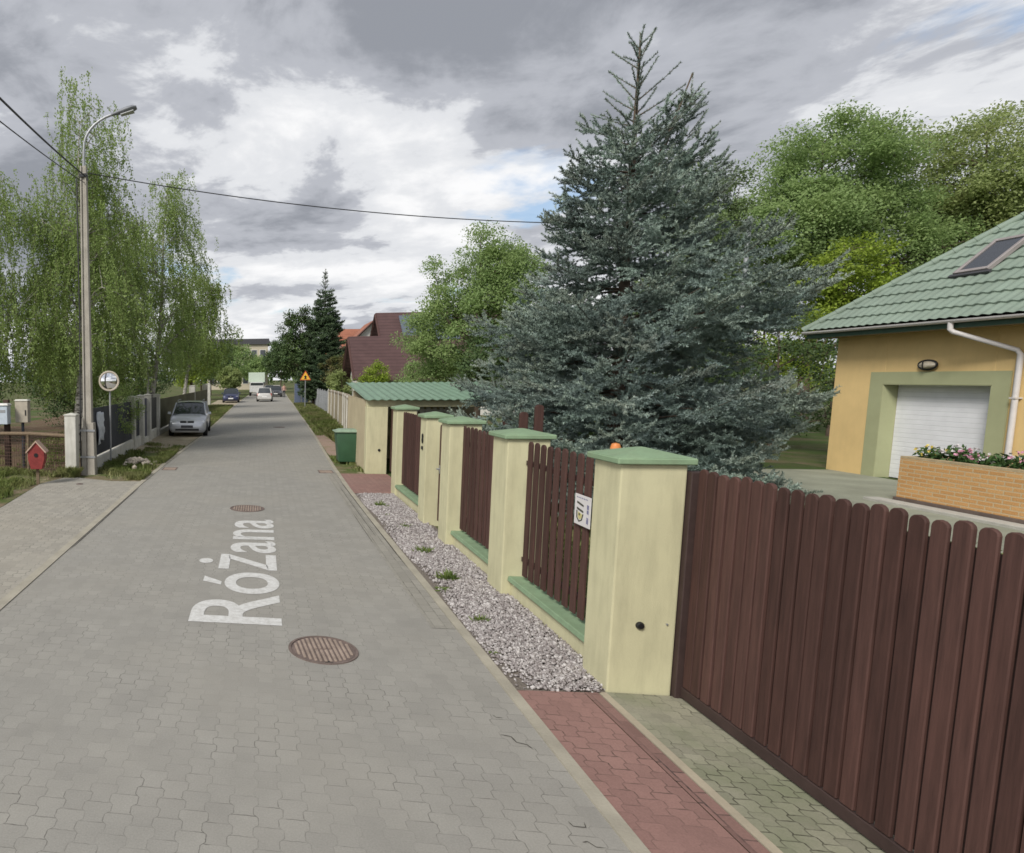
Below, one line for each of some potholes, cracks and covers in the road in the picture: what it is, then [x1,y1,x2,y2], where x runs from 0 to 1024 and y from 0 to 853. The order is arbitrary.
manhole cover [288,636,359,665]
